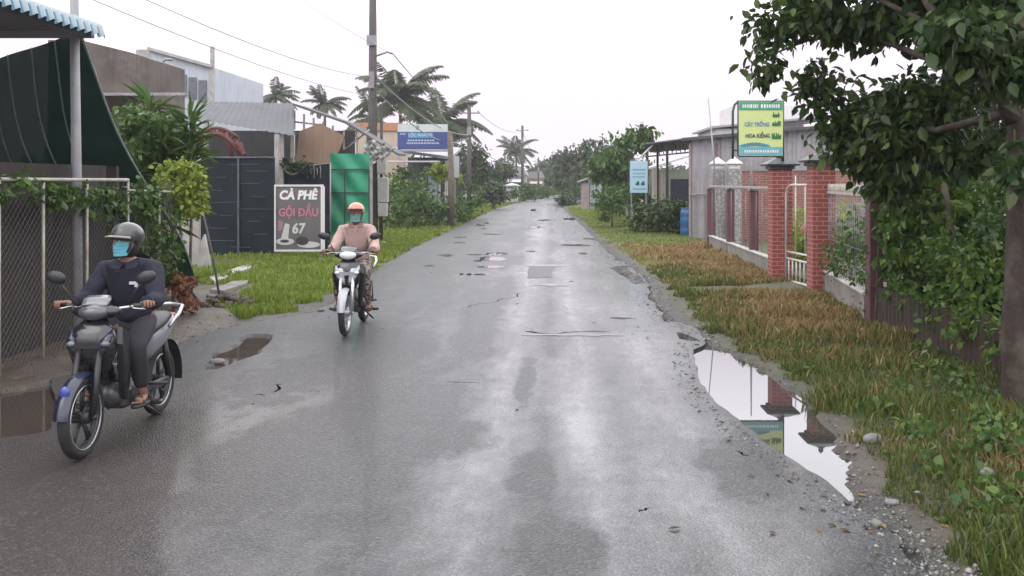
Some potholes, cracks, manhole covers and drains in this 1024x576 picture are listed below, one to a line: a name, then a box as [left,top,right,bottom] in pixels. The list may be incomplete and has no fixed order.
pothole [610,265,645,284]
pothole [203,333,273,374]
